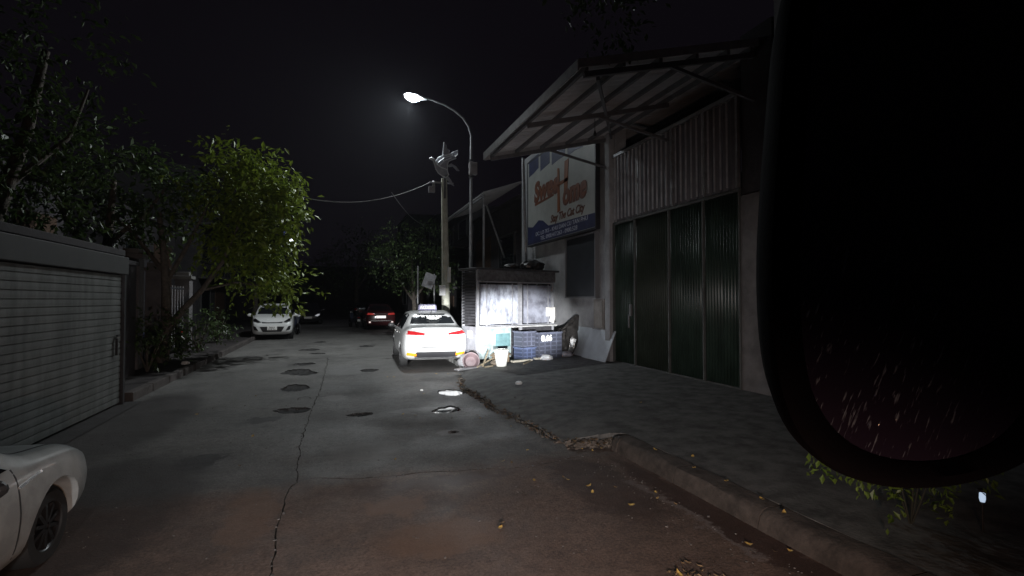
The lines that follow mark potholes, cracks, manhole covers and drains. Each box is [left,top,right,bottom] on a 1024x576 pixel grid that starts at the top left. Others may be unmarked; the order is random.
pothole [274,406,311,414]
crack [269,358,329,576]
pothole [431,405,461,414]
pothole [280,384,310,392]
